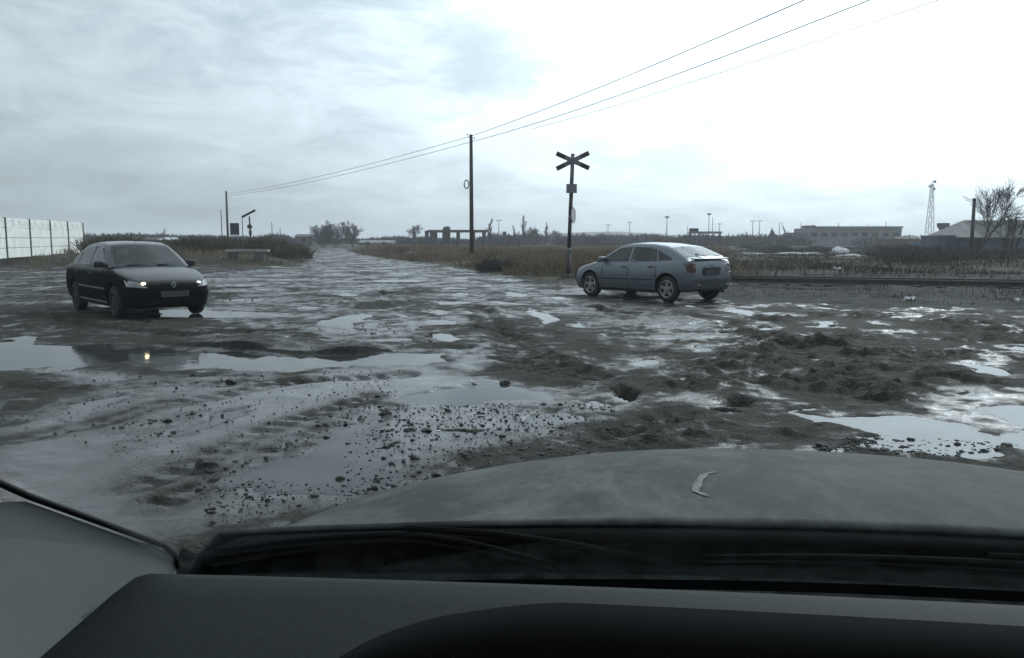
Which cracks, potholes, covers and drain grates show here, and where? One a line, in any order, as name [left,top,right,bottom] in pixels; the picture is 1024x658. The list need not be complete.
pothole [384,376,568,409]
pothole [769,402,1024,462]
pothole [601,381,647,402]
pothole [0,331,477,373]
